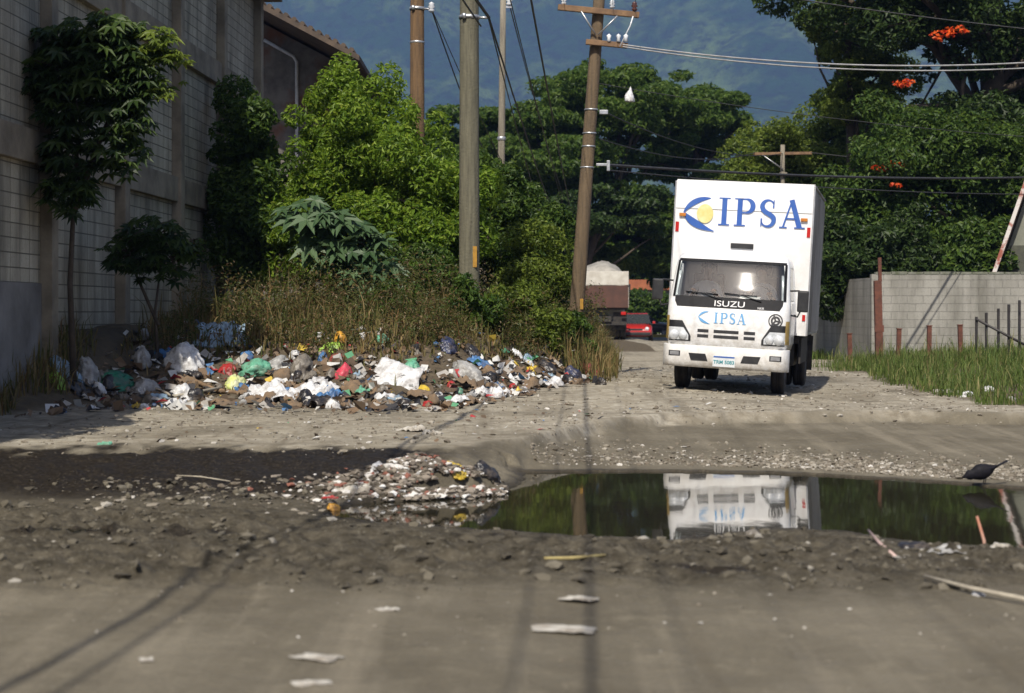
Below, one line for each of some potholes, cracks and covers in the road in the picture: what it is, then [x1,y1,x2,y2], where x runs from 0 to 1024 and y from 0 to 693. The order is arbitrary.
pothole [306,465,1024,542]
